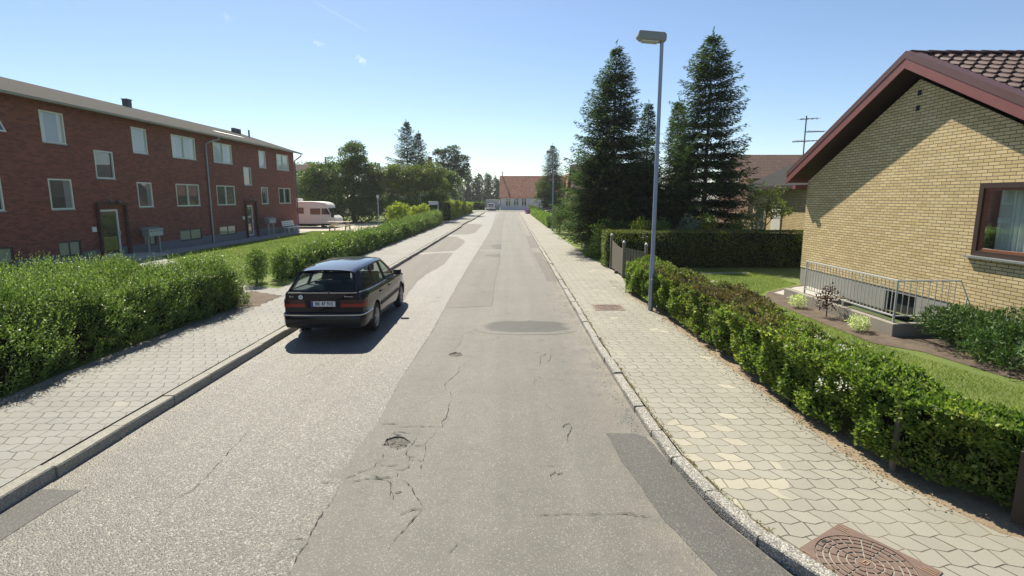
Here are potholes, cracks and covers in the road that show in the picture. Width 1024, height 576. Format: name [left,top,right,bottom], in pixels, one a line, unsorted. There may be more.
pothole [384,436,411,450]
crack [290,331,471,572]
manhole cover [798,523,943,576]
